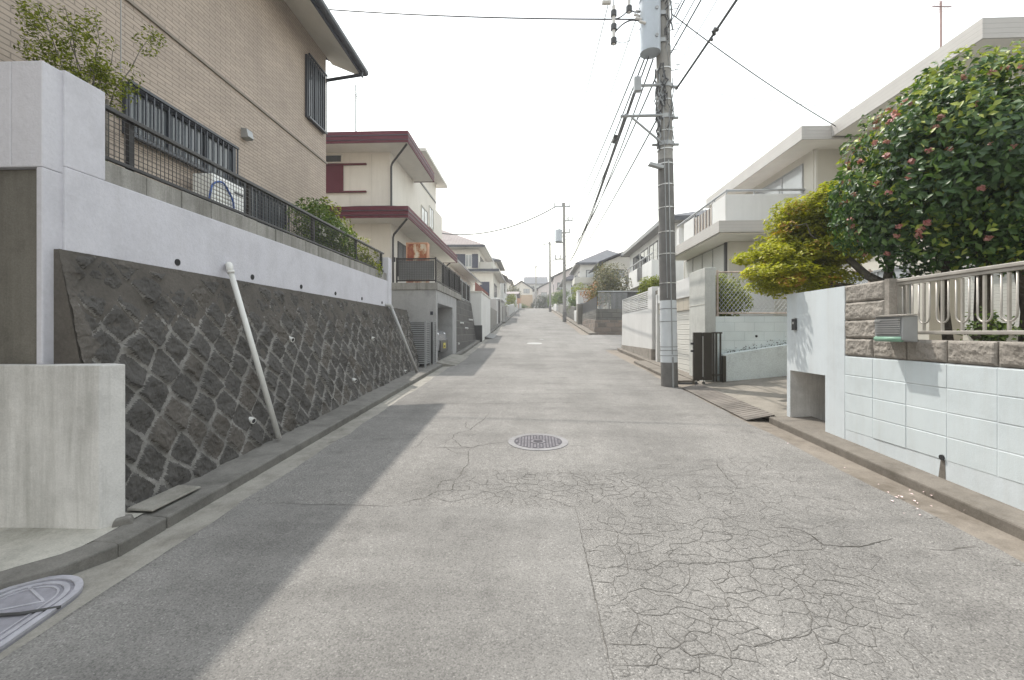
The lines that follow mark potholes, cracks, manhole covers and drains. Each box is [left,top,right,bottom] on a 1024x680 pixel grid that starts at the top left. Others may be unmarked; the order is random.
crack [404,402,890,547]
manhole cover [508,433,568,451]
manhole cover [0,575,84,653]
crack [583,507,956,680]
